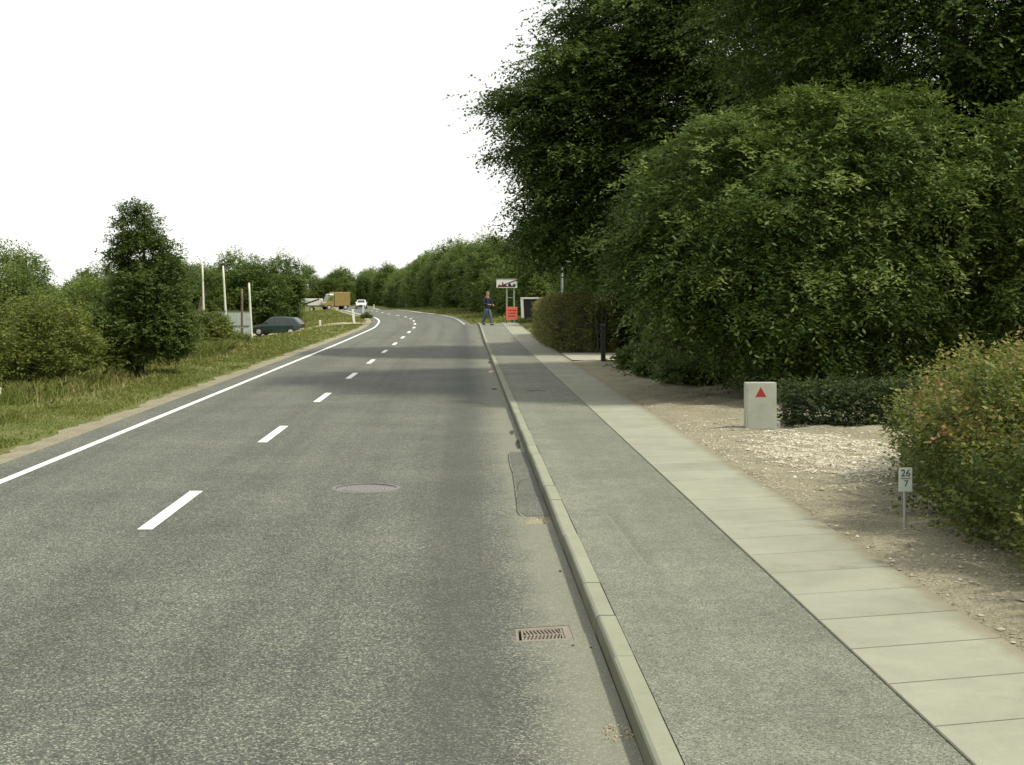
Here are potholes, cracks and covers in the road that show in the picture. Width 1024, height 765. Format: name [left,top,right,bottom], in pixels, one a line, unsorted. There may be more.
manhole cover [331,483,401,493]
drain grate [515,625,574,642]
